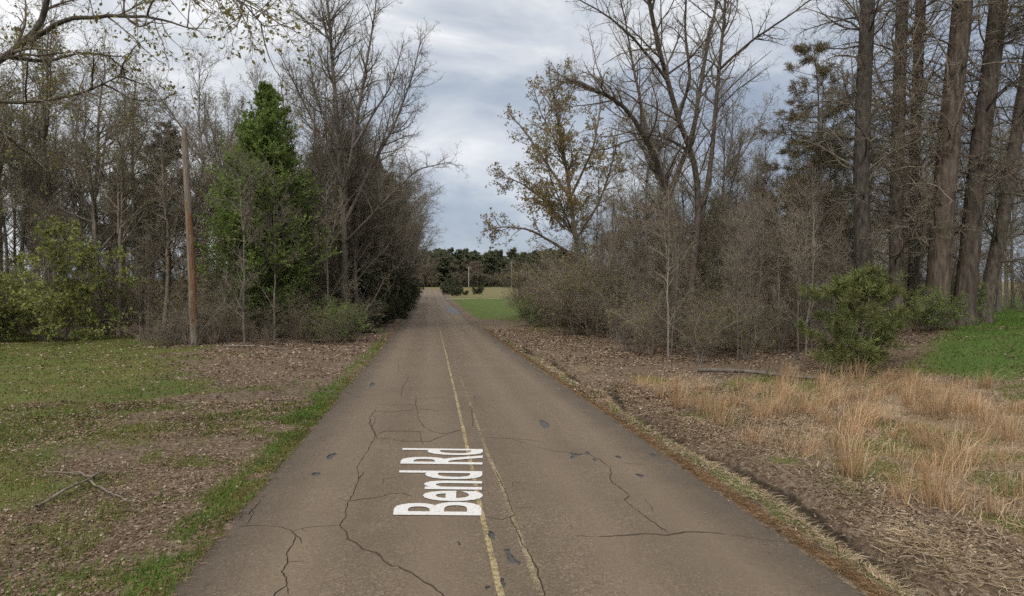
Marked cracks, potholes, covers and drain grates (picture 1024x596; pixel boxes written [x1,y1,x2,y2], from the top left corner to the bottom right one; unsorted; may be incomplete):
crack [515,440,787,543]
crack [239,365,475,596]
pothole [504,548,521,565]
